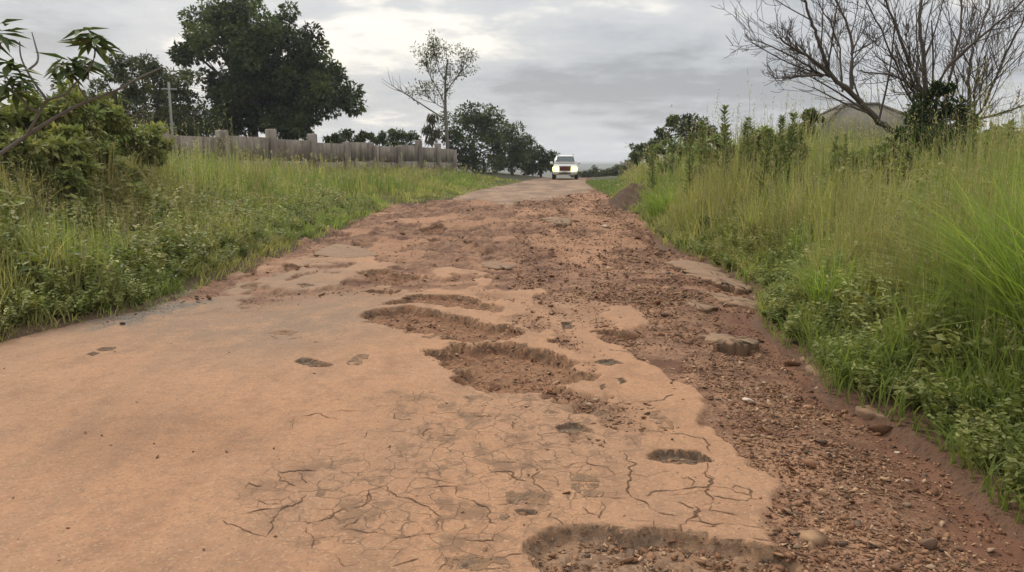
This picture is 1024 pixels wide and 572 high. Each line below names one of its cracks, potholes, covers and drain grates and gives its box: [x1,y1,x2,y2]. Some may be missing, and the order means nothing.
pothole [378,294,501,311]
pothole [423,341,598,395]
pothole [359,305,528,343]
pothole [554,422,593,435]
pothole [294,357,334,367]
crack [222,422,769,570]
pothole [346,354,369,365]
pothole [646,449,715,465]
pothole [522,524,813,572]
